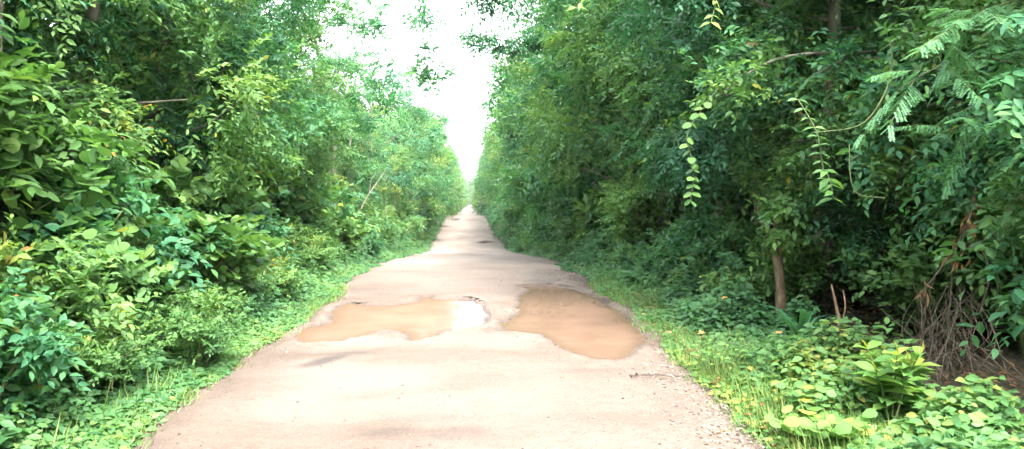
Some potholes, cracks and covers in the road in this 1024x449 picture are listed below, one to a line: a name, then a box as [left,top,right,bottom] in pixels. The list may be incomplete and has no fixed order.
pothole [270,293,502,348]
pothole [478,281,669,368]
